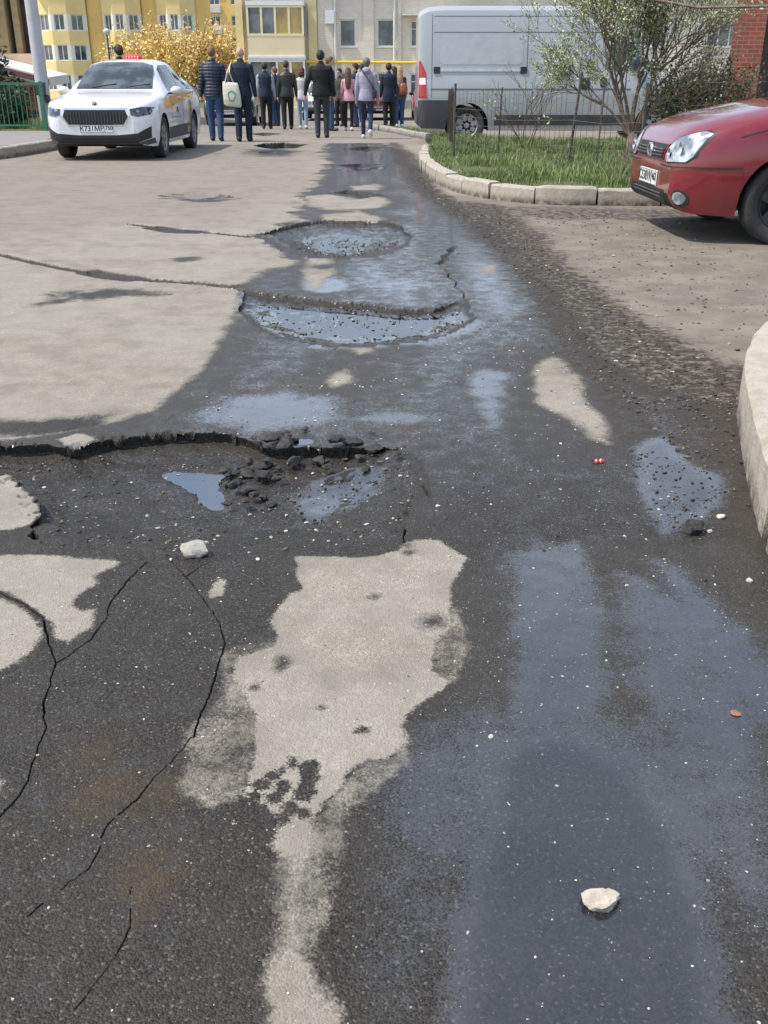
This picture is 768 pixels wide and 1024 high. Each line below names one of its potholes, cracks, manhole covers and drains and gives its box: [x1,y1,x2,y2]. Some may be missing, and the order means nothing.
crack [0,561,148,818]
crack [27,561,227,917]
pothole [156,192,242,202]
pothole [254,220,413,261]
crack [434,246,466,298]
pothole [0,432,431,563]
crack [0,223,254,291]
pothole [238,290,476,348]
crack [74,886,133,1010]
